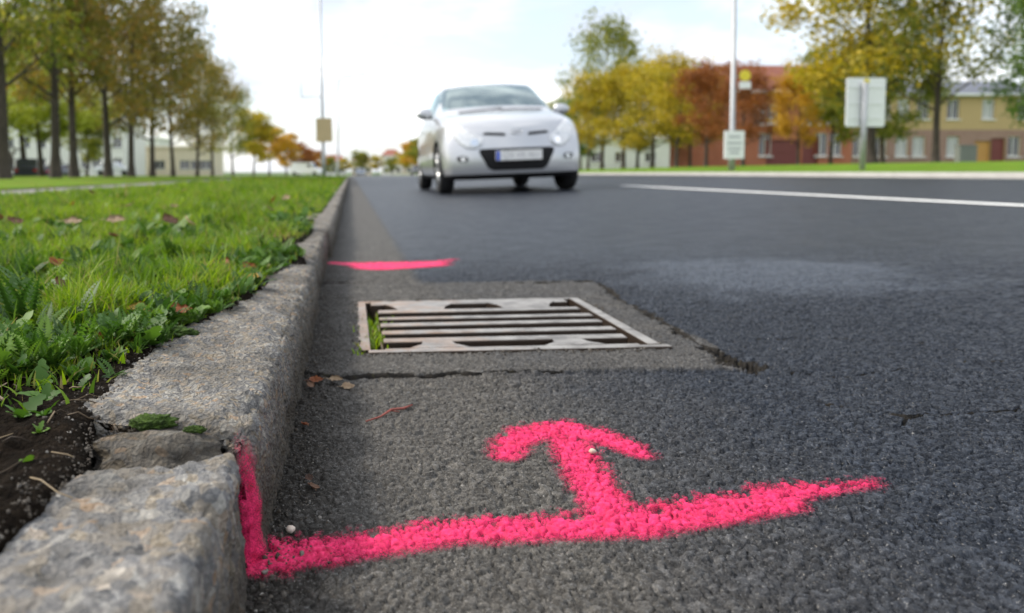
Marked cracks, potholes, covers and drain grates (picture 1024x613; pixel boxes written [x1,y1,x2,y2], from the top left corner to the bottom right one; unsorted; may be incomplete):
crack [825,403,1021,426]
drain grate [357,298,672,355]
